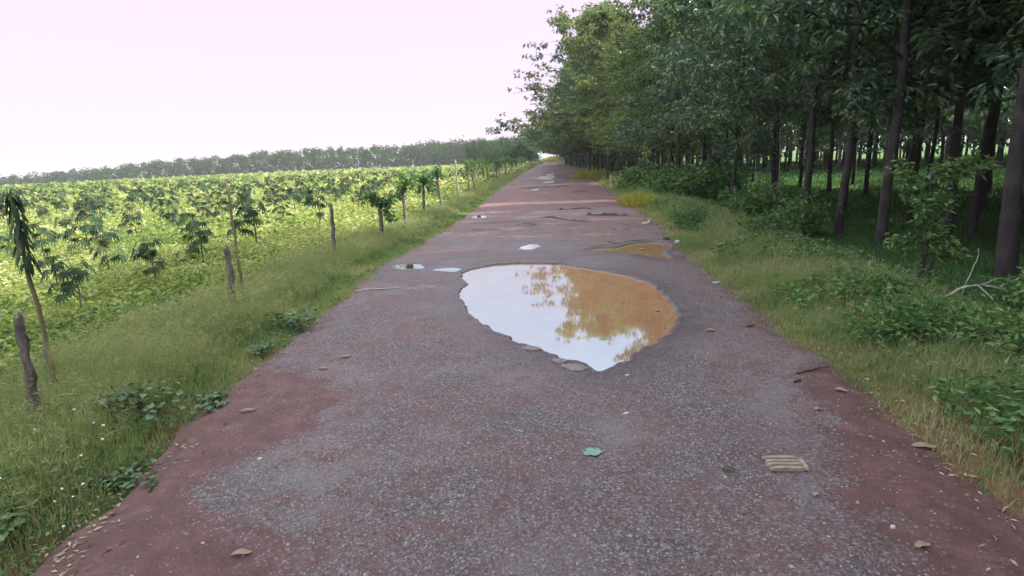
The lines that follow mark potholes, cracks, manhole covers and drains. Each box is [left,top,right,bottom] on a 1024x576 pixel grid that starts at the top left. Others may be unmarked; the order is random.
pothole [580,240,677,260]
pothole [387,262,430,270]
pothole [454,262,685,374]
